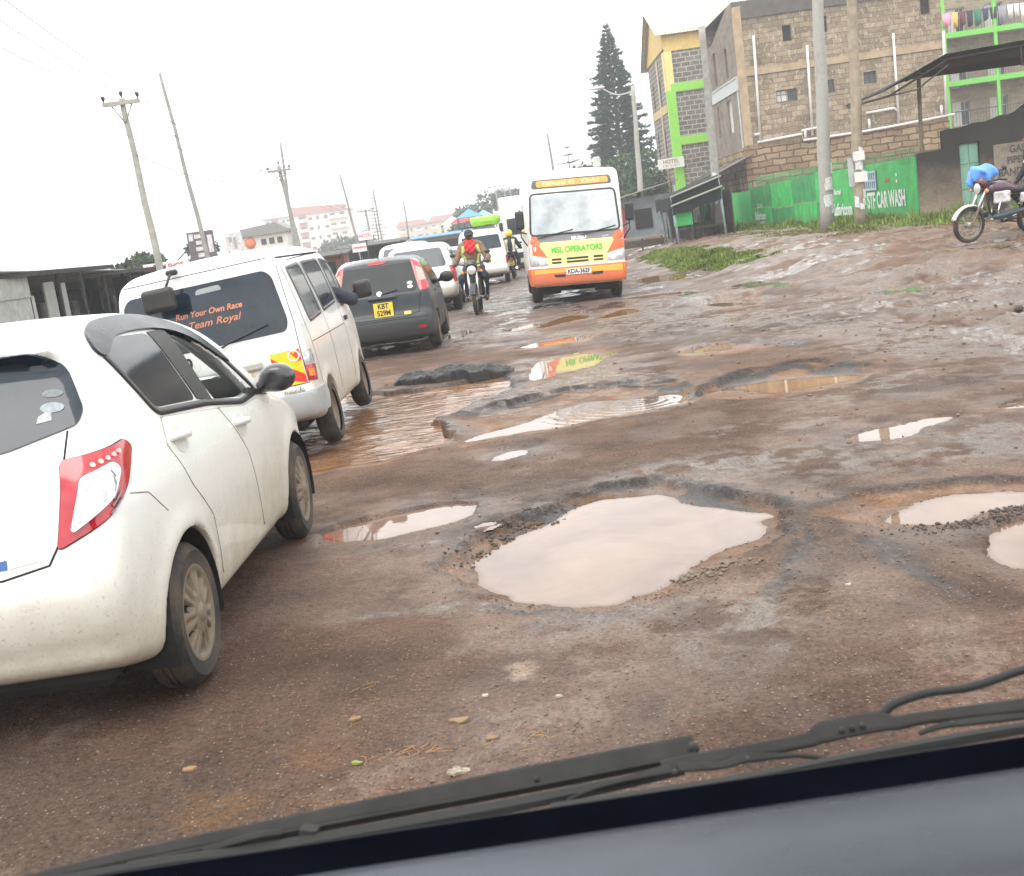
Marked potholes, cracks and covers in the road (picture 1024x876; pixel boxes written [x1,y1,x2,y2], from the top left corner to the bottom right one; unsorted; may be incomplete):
pothole [508,331,611,351]
pothole [514,346,629,389]
pothole [829,412,970,446]
pothole [792,472,1024,534]
pothole [964,513,1024,580]
pothole [299,373,518,477]
pothole [697,357,909,402]
pothole [300,495,492,554]
pothole [422,474,803,616]
pothole [442,376,708,450]
